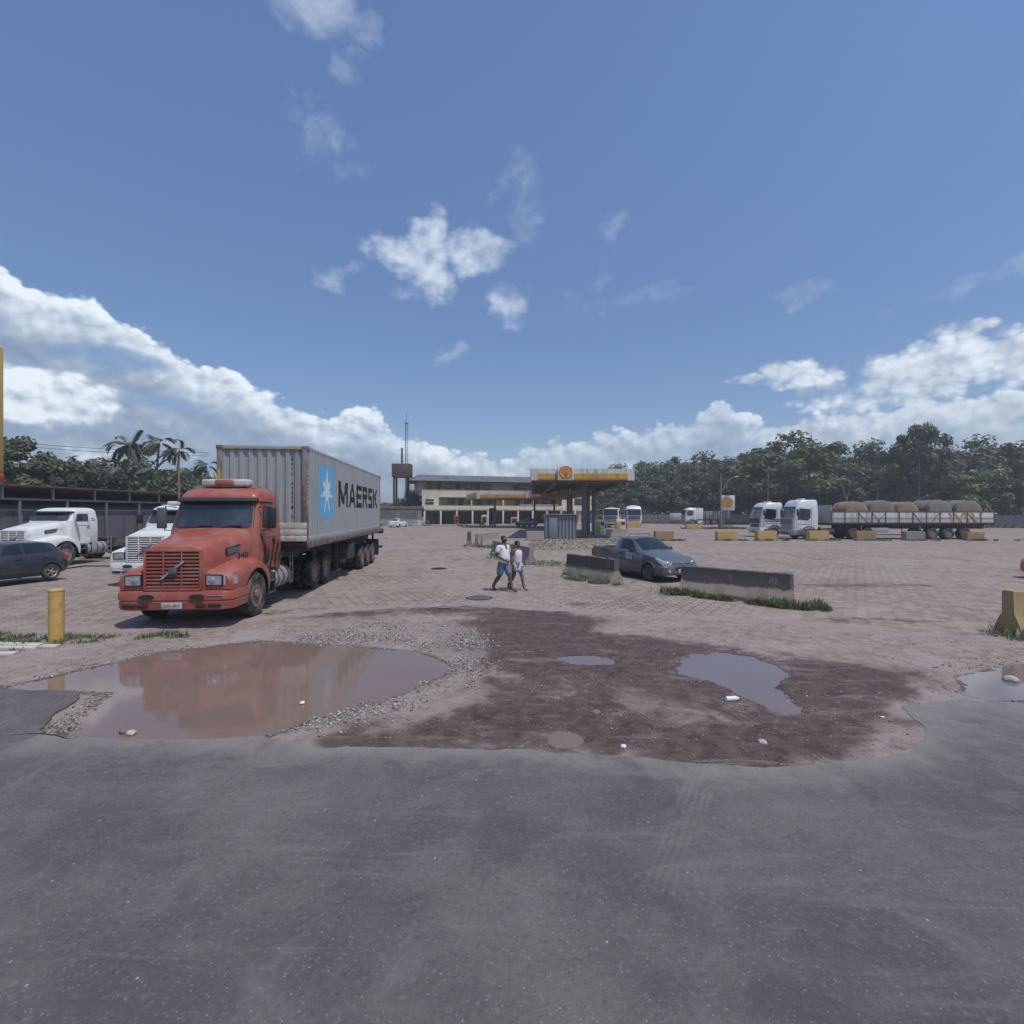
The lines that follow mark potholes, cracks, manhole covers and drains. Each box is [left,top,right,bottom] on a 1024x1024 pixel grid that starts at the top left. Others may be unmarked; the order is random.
pothole [0,637,468,740]
pothole [654,648,830,725]
pothole [936,659,1024,703]
